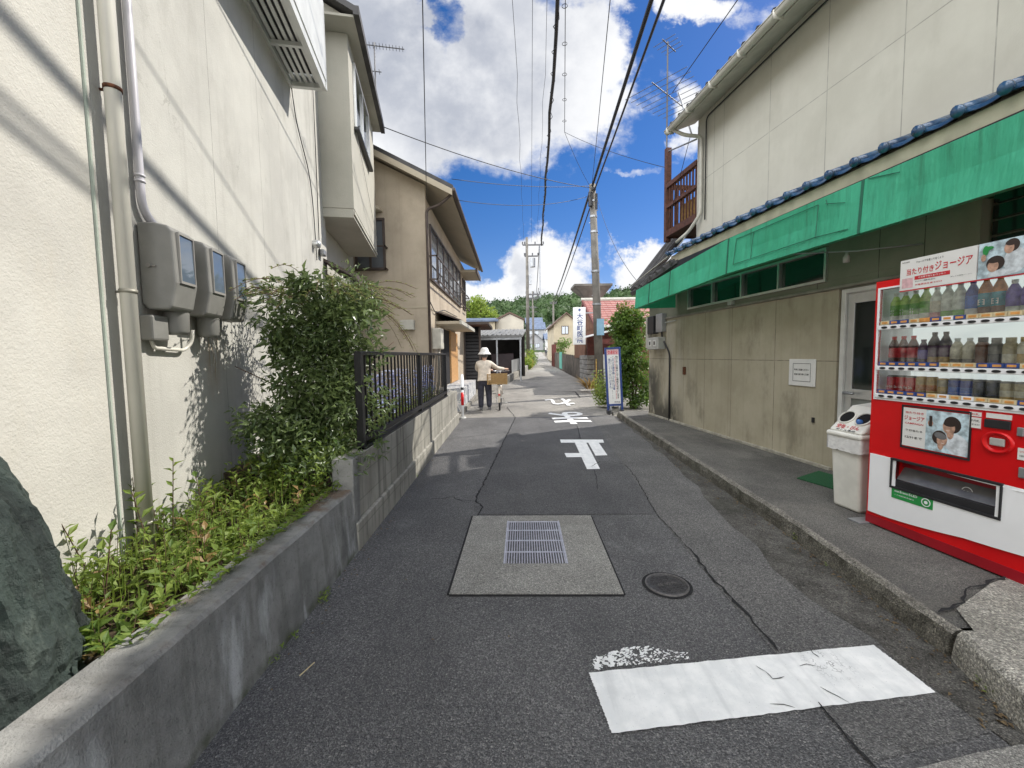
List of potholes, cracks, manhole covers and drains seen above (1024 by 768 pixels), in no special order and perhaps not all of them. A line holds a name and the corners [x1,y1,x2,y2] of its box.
manhole cover [642,572,693,598]
crack [594,461,877,768]
